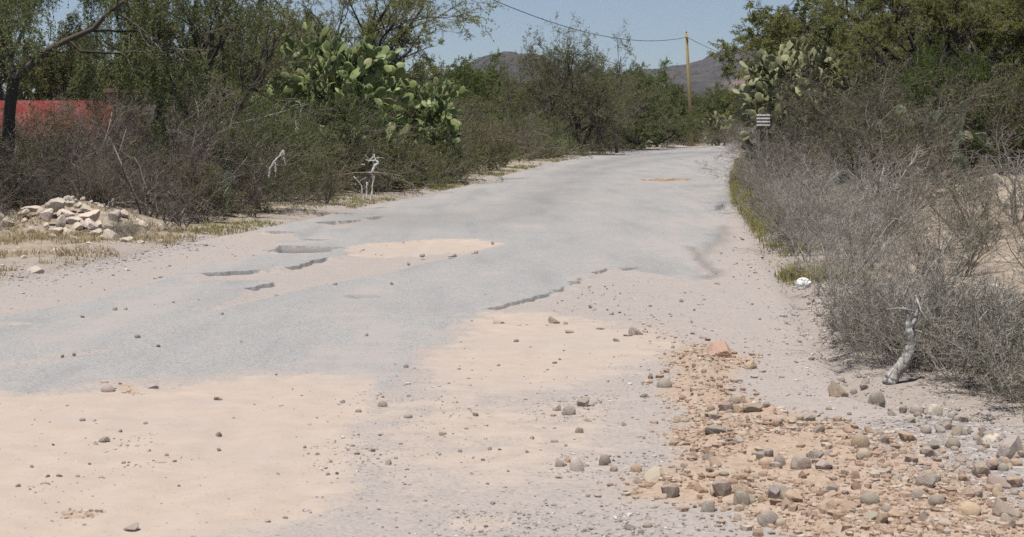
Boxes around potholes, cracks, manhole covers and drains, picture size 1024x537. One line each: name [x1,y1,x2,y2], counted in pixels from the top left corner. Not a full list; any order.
pothole [301,216,390,231]
pothole [0,238,511,369]
